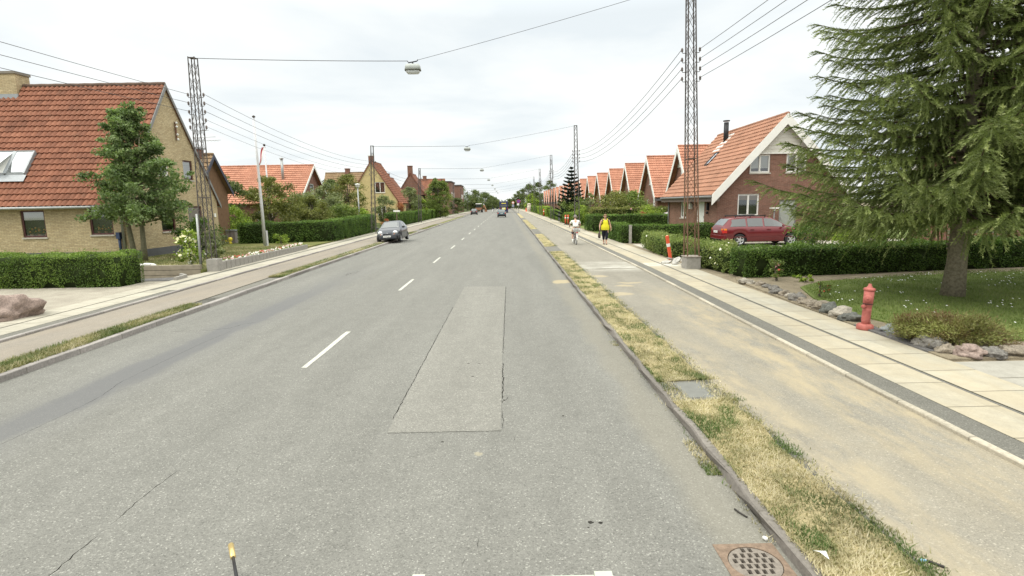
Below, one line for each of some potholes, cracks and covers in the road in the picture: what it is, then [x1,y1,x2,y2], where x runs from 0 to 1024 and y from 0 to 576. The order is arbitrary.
crack [501,287,515,440]
drain grate [712,543,797,576]
